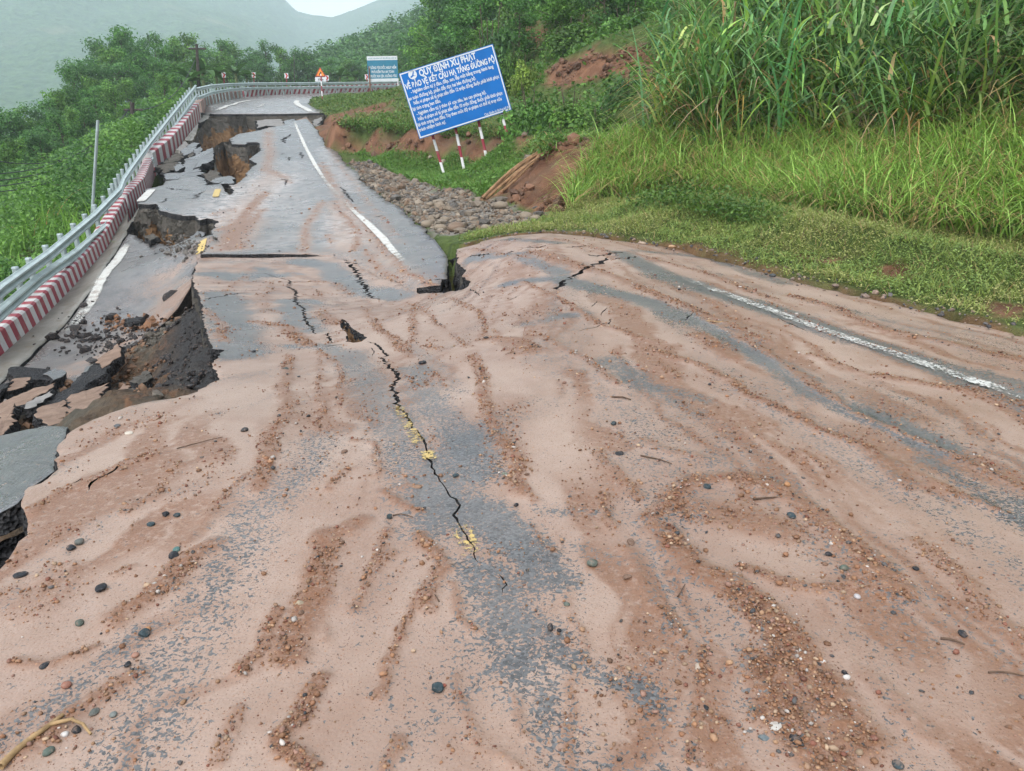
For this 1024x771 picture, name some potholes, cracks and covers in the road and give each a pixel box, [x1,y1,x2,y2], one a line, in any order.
crack [218,256,333,347]
pothole [193,115,324,173]
crack [553,246,636,290]
pothole [213,142,260,195]
pothole [131,208,214,246]
pothole [340,320,367,343]
crack [370,342,507,592]
crack [345,260,375,299]
